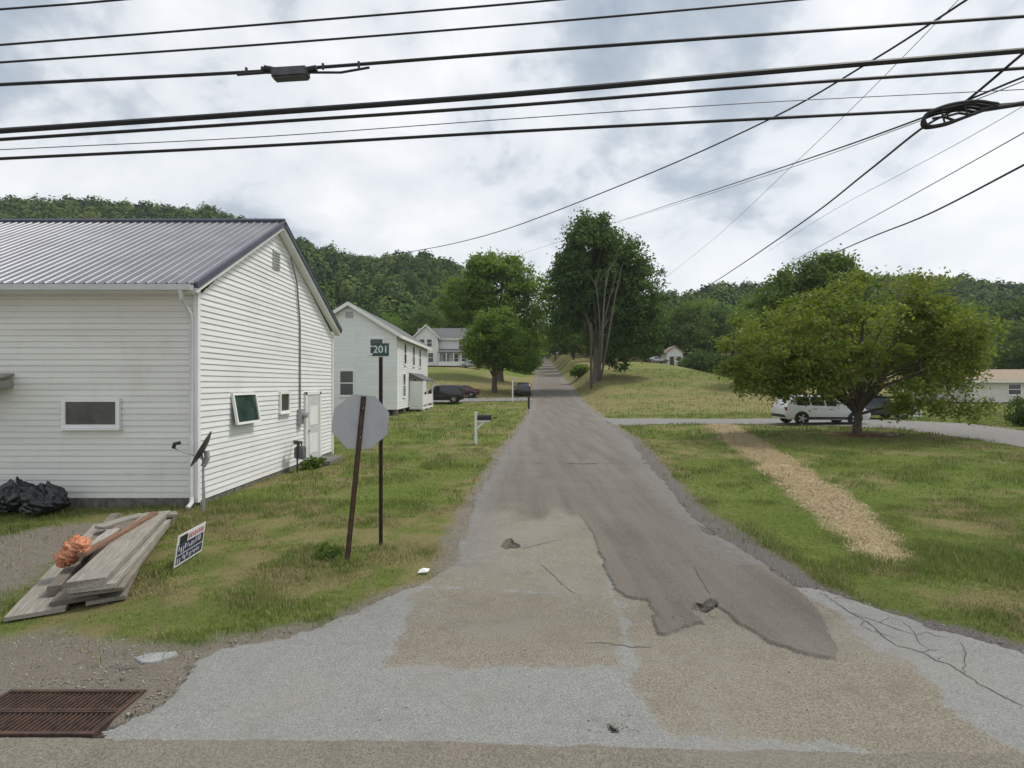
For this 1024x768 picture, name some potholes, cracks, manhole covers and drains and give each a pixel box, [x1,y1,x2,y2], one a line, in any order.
pothole [501,538,521,549]
crack [822,593,1023,706]
pothole [692,597,719,613]
drain grate [0,689,146,739]
